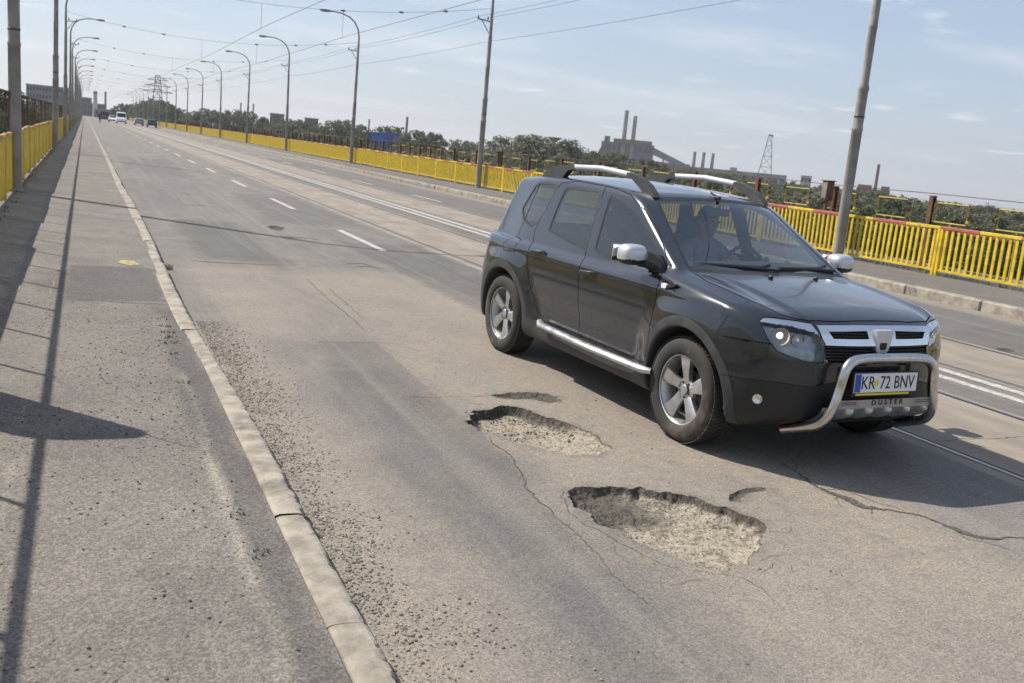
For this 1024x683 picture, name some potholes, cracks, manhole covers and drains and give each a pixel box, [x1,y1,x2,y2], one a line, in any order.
pothole [567,486,767,571]
pothole [491,392,561,403]
pothole [465,406,613,456]
crack [774,458,1024,550]
